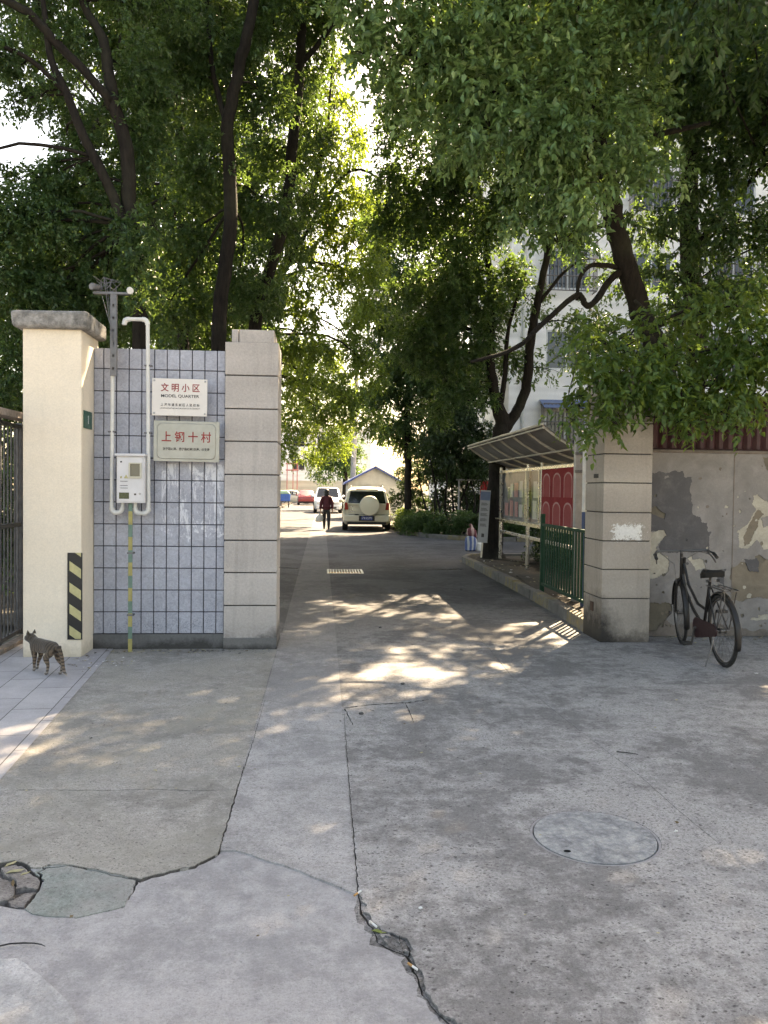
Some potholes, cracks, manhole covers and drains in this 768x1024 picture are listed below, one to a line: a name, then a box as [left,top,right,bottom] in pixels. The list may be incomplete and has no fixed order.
pothole [0,861,42,910]
crack [38,705,264,900]
crack [344,700,457,1024]
manhole cover [530,811,661,866]
